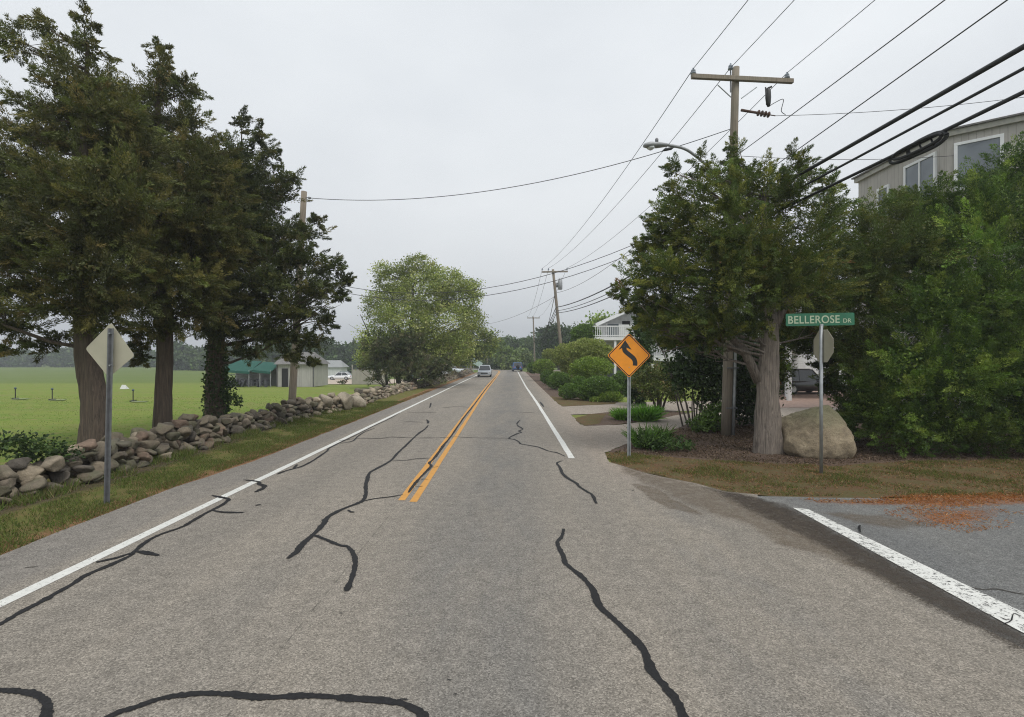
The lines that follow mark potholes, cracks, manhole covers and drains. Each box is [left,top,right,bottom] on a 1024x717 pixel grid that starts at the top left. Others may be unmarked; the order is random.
crack [339,377,496,492]
